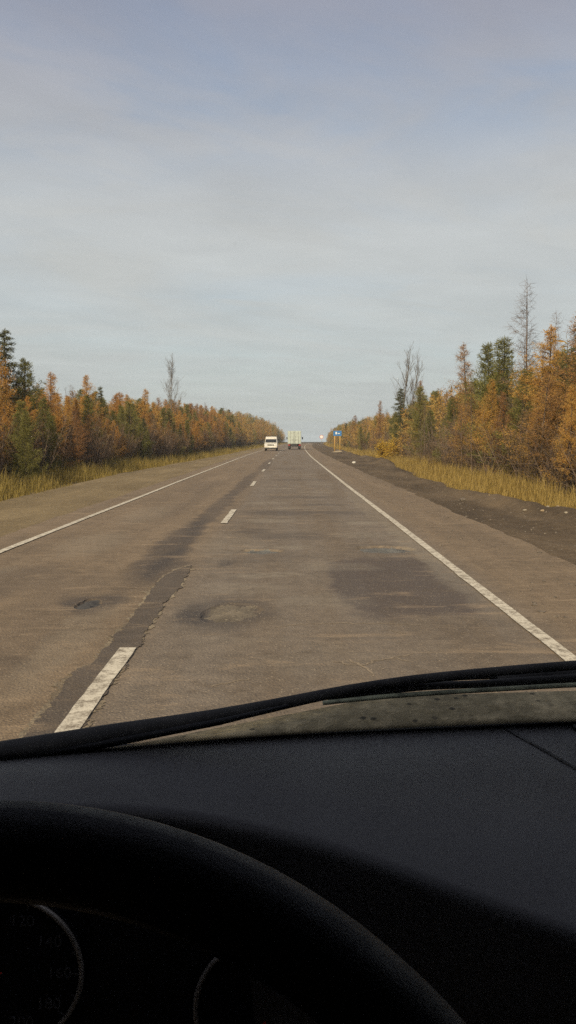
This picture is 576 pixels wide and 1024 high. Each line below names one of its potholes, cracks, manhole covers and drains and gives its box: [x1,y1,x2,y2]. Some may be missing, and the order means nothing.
pothole [198,602,265,623]
crack [333,654,410,676]
pothole [74,598,102,610]
